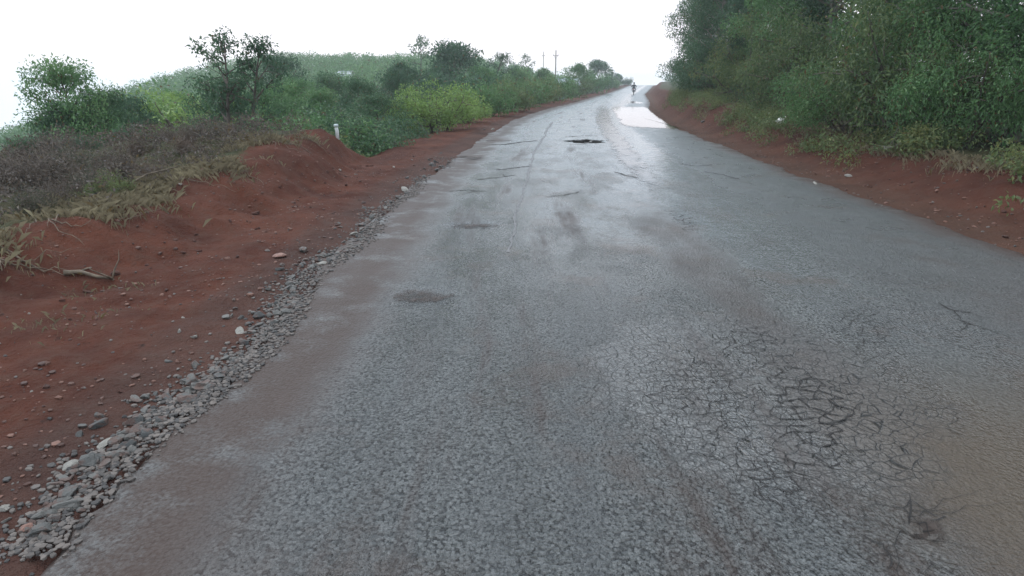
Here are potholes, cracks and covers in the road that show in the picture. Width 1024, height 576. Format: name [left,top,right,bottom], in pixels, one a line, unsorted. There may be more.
crack [727,353,864,523]
crack [833,309,902,360]
crack [940,303,1015,339]
crack [453,158,527,193]
crack [647,322,781,437]
